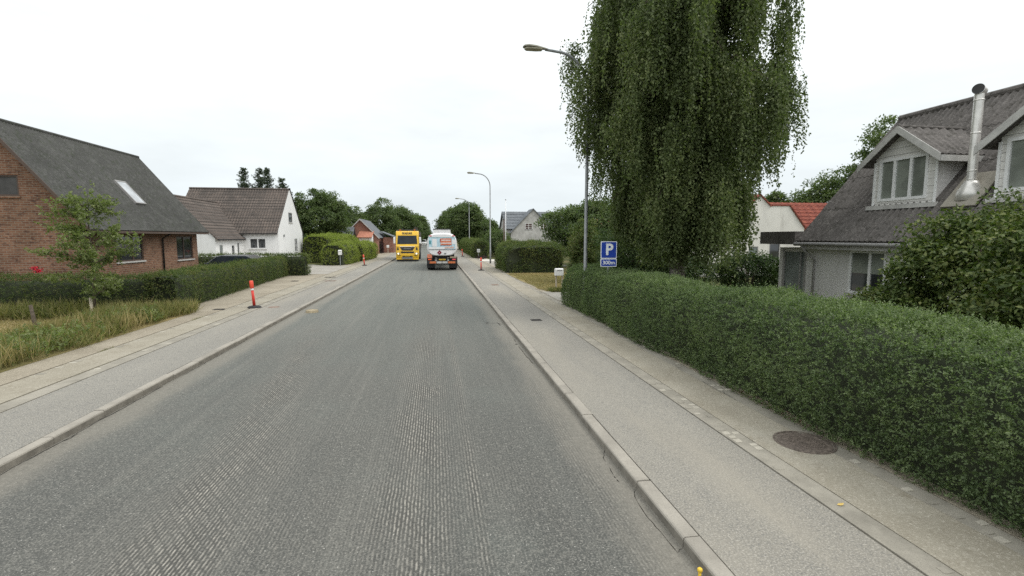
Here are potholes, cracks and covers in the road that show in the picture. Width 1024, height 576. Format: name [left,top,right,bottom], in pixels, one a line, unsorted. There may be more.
crack [610,469,683,553]
manhole cover [773,431,837,455]
